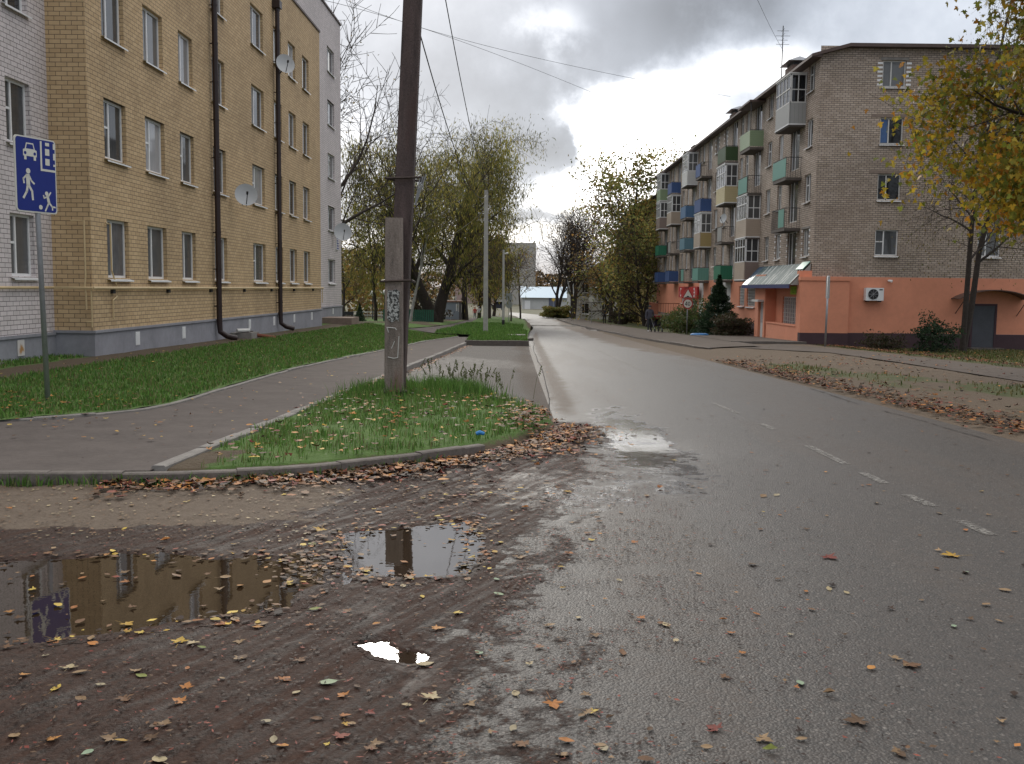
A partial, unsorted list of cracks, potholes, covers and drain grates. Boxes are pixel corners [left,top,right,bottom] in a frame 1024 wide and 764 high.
pothole [309,513,501,585]
pothole [0,547,352,650]
